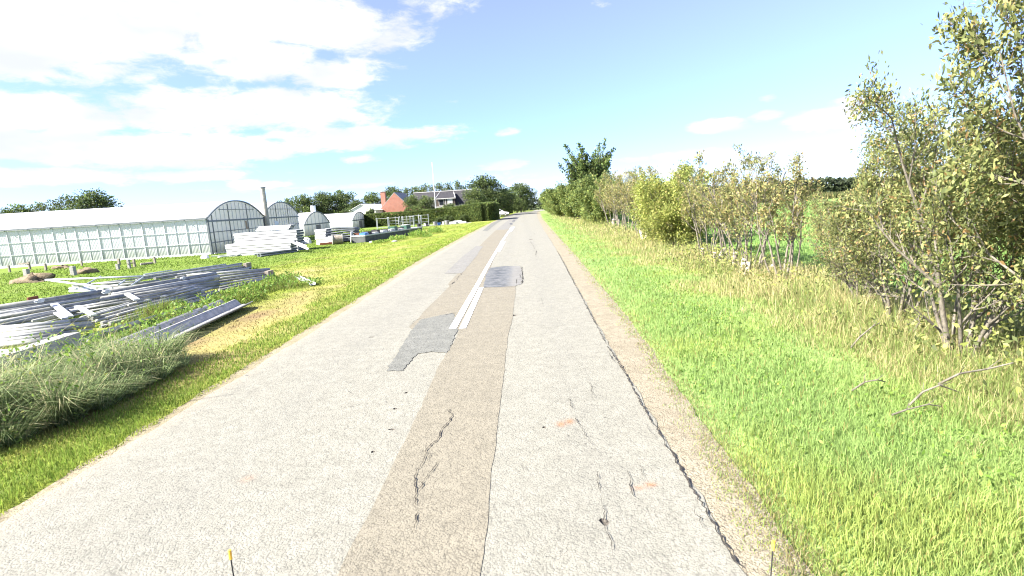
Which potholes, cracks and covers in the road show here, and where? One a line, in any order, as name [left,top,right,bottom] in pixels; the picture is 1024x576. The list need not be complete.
crack [557,251,744,570]
crack [414,409,453,533]
